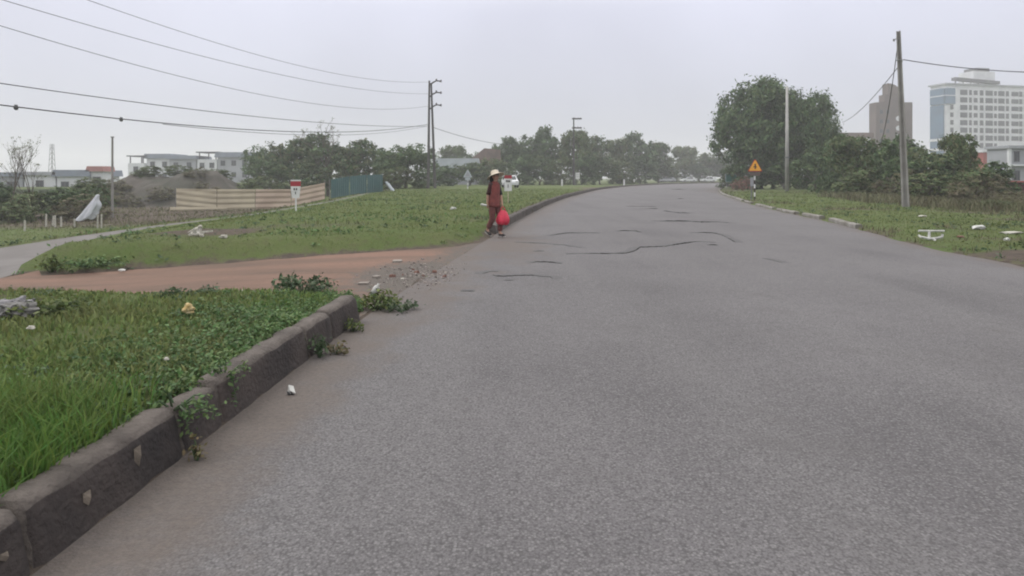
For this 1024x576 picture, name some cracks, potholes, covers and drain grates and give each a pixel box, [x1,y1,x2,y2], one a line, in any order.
crack [461,198,744,292]
